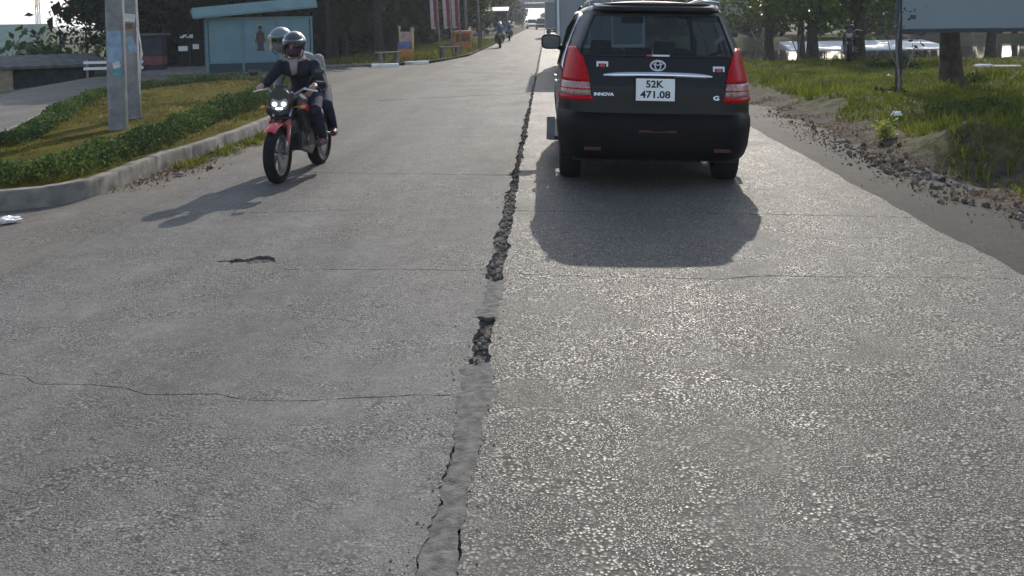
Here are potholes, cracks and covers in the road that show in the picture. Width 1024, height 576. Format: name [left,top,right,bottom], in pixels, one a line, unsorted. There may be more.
crack [510,32,545,193]
